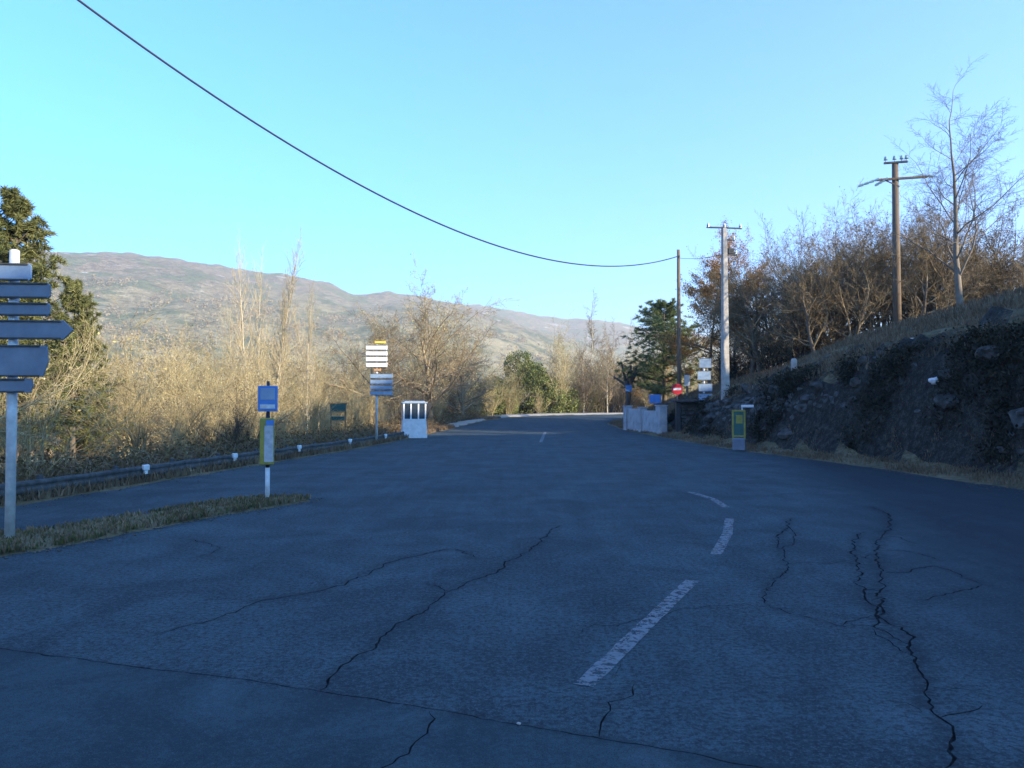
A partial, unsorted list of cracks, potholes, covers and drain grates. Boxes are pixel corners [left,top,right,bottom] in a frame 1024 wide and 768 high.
crack [582,518,844,632]
crack [771,508,989,768]
crack [381,712,436,768]
crack [161,599,266,633]
crack [260,549,475,601]
crack [599,667,634,737]
crack [318,526,559,691]
